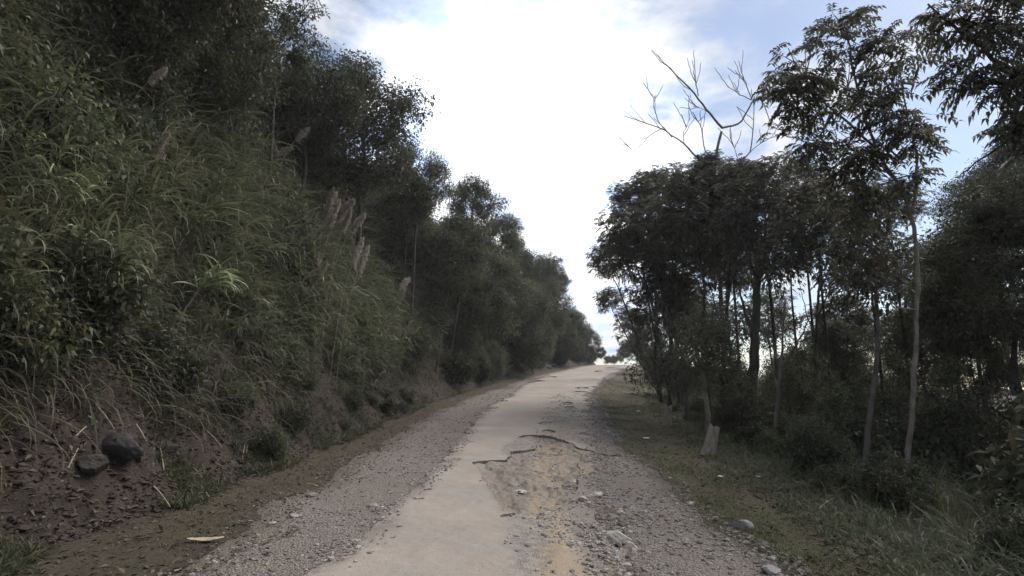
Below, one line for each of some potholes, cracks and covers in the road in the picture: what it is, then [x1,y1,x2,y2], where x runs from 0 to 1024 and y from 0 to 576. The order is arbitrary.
pothole [472,435,583,515]
